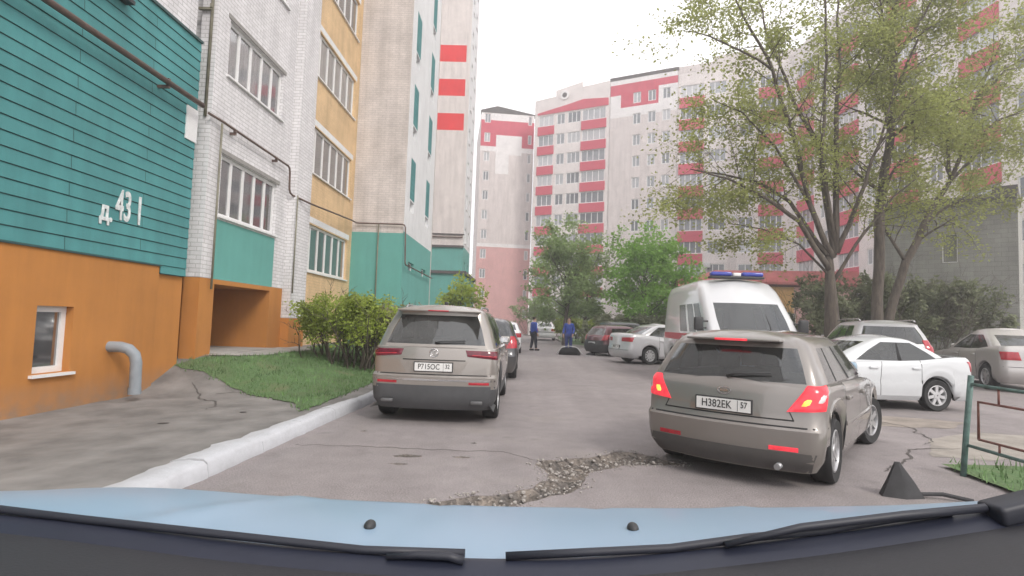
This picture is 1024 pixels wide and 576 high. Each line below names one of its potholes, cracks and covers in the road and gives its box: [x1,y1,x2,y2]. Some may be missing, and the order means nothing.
crack [192,382,275,409]
crack [885,422,960,471]
pothole [420,449,692,507]
